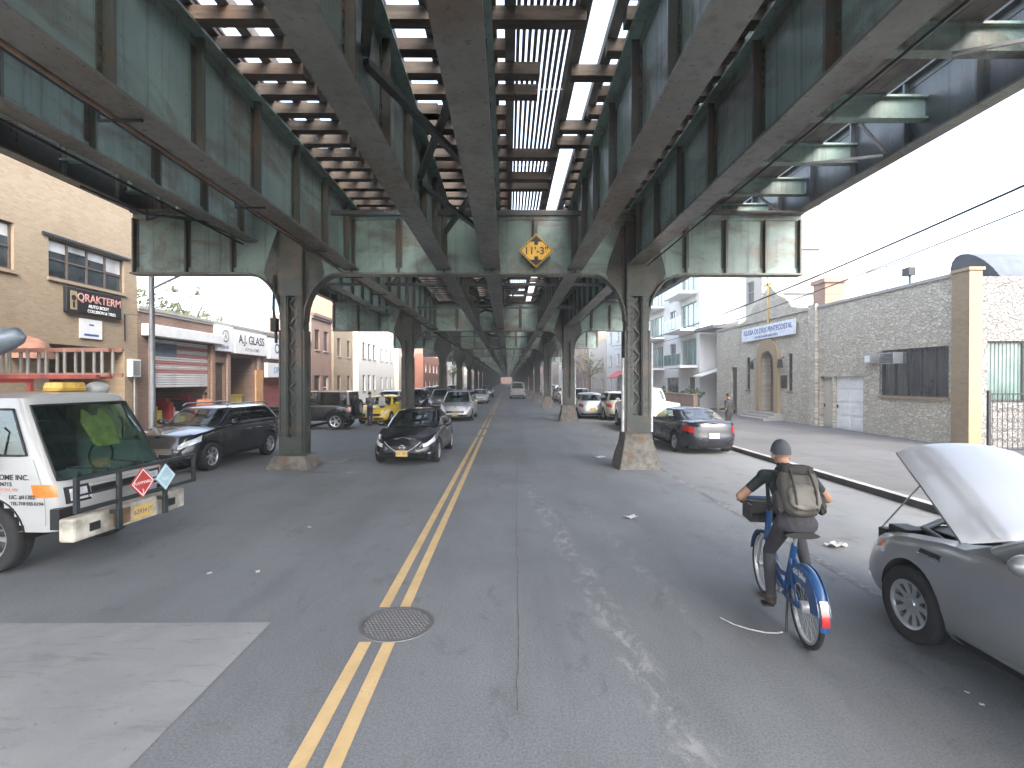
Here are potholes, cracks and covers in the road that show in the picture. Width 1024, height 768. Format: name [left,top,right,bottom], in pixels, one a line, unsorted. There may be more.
manhole cover [358,607,435,643]
